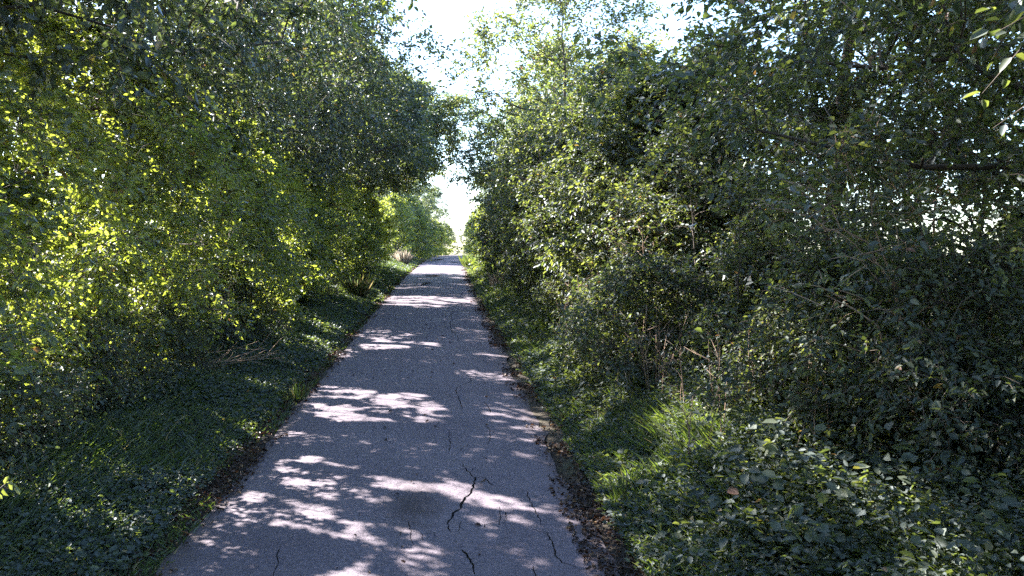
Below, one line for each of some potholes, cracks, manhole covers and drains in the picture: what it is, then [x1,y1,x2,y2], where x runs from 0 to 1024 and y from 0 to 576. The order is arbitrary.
crack [462,550,475,574]
crack [527,491,577,576]
crack [408,402,507,543]
